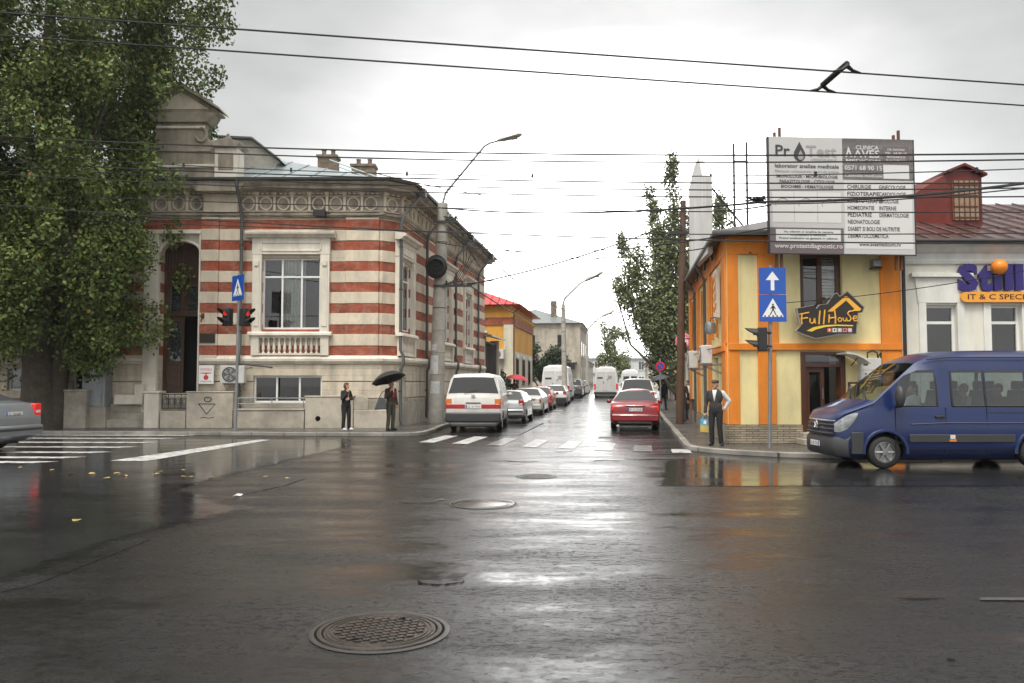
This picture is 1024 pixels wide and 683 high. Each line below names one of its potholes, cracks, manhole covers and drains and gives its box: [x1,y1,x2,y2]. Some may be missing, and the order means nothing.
manhole cover [308,611,450,654]
manhole cover [449,499,518,509]
